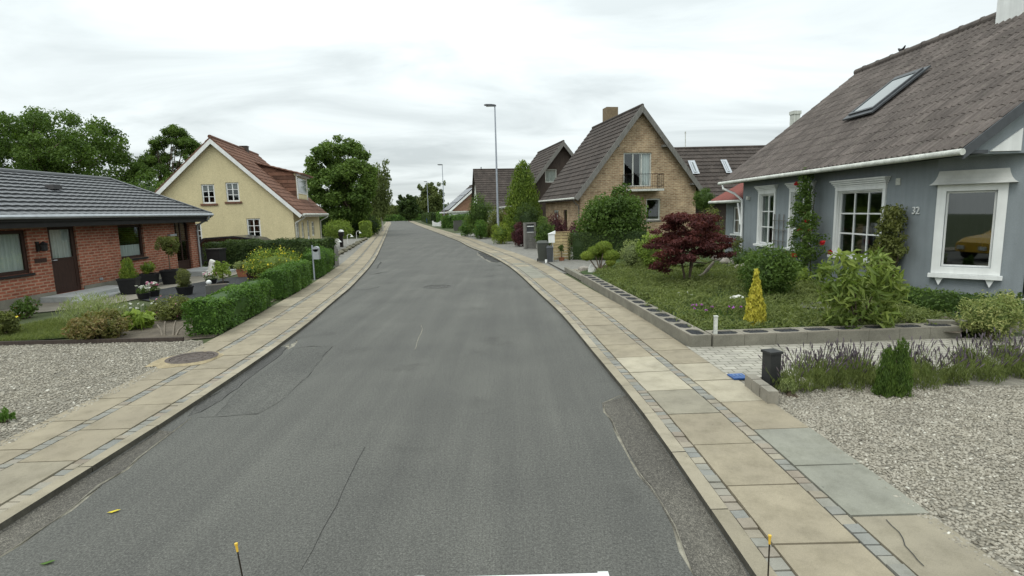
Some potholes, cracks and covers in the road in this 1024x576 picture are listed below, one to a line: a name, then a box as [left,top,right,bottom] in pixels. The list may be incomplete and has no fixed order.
crack [0,341,332,558]
crack [886,519,924,566]
crack [301,449,364,570]
manhole cover [145,351,224,369]
